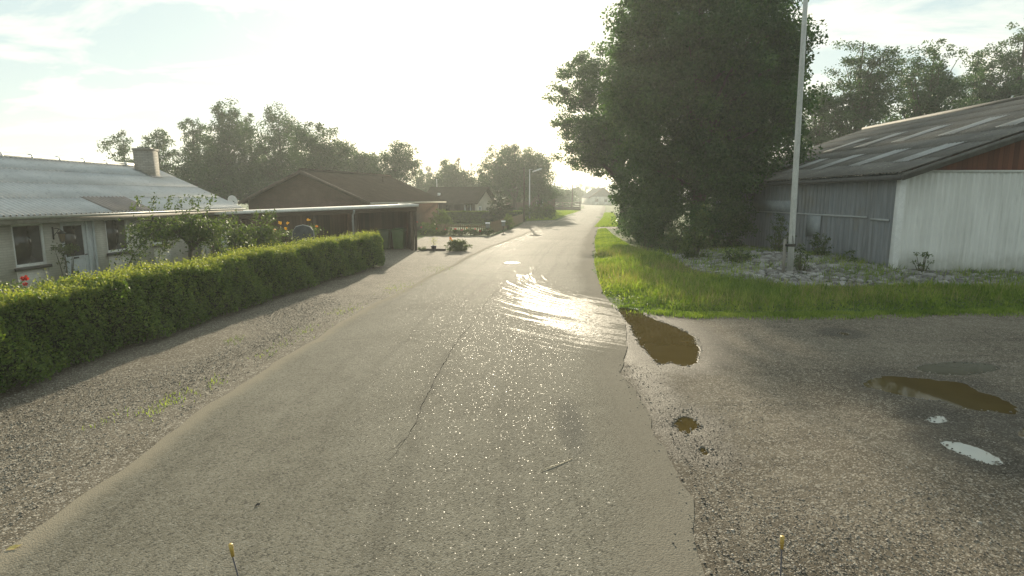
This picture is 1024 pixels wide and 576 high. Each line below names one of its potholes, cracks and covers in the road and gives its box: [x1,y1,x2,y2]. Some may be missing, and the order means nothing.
pothole [694,445,717,458]
pothole [670,415,703,437]
pothole [615,308,702,367]
crack [388,298,490,461]
pothole [859,374,1024,414]
